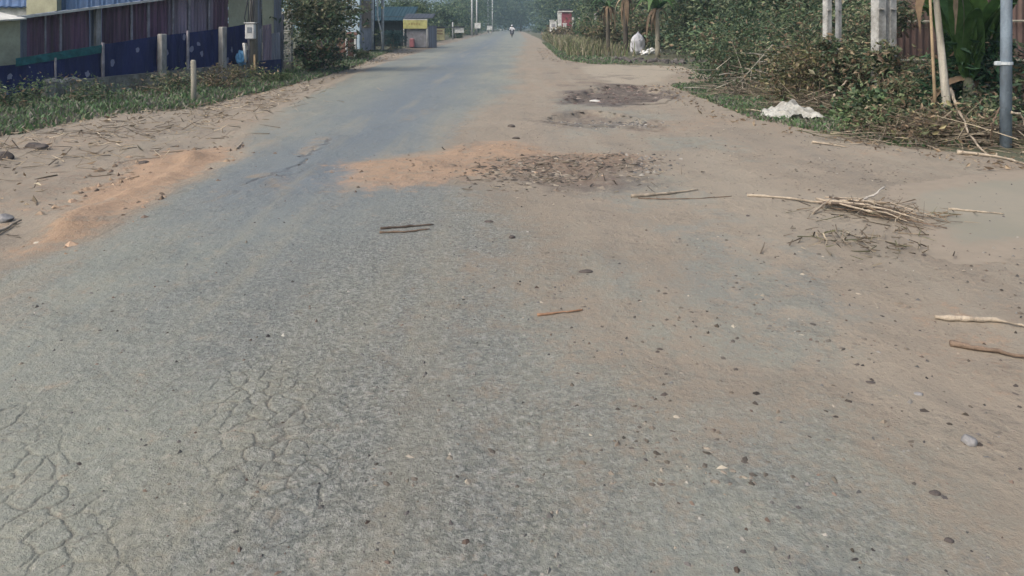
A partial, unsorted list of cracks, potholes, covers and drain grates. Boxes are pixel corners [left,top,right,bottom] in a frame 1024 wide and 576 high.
crack [171,134,354,212]
pothole [538,108,667,131]
pothole [551,84,678,106]
crack [0,352,364,576]
